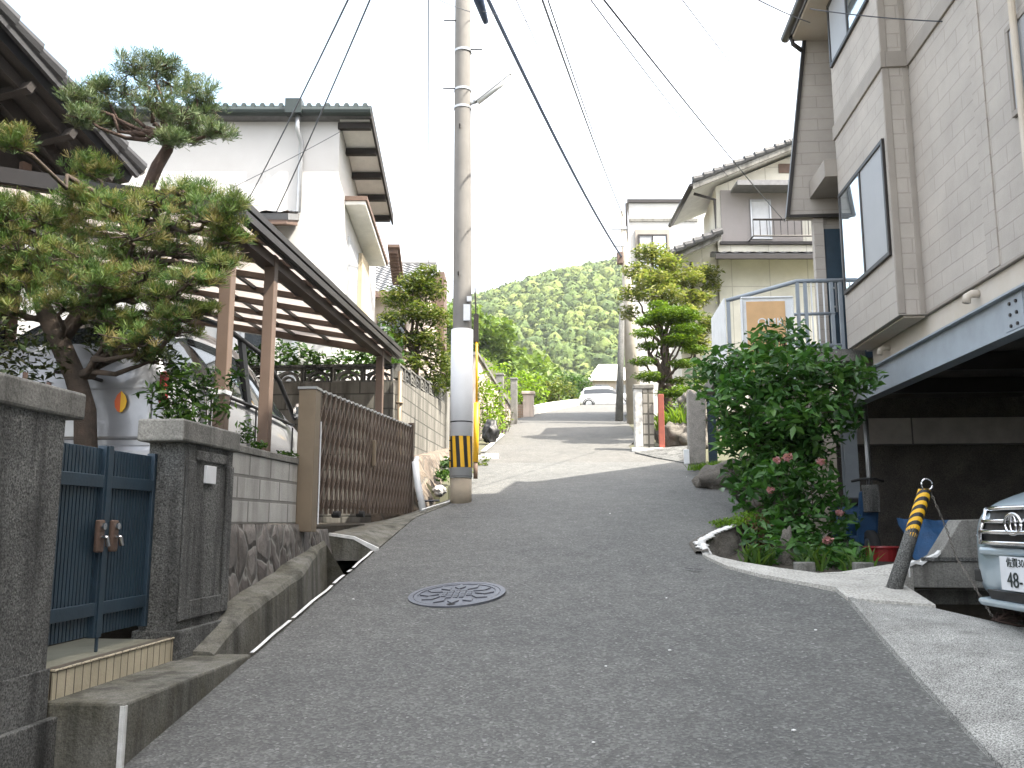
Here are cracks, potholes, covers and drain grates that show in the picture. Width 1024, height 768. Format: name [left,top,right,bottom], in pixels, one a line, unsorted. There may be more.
manhole cover [408,582,506,608]
